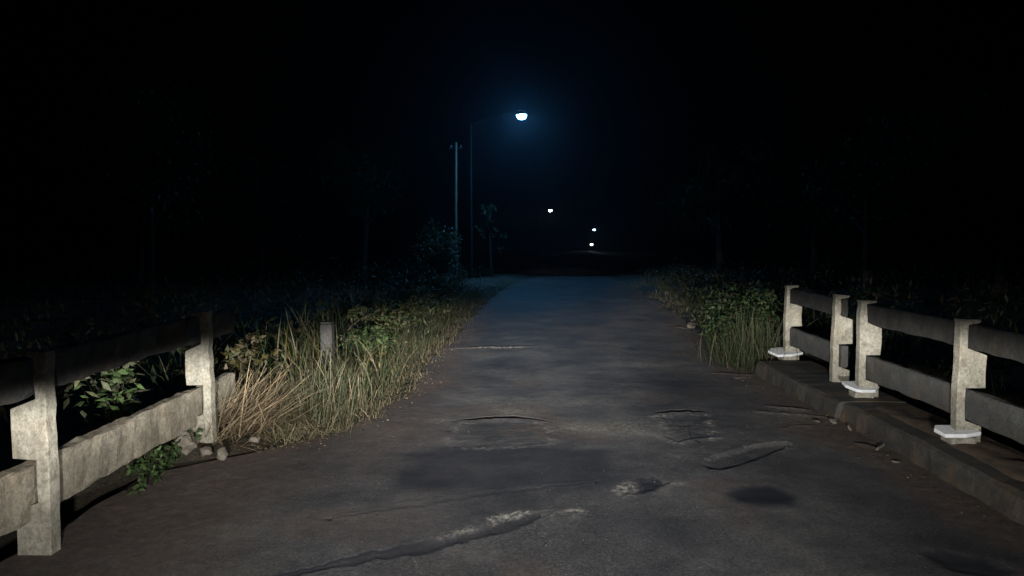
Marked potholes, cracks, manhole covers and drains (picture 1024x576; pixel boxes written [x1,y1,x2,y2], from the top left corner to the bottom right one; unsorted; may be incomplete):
pothole [648,411,725,445]
pothole [692,439,800,473]
pothole [440,421,561,451]
crack [751,404,830,428]
crack [259,479,595,576]
pothole [601,474,680,500]
